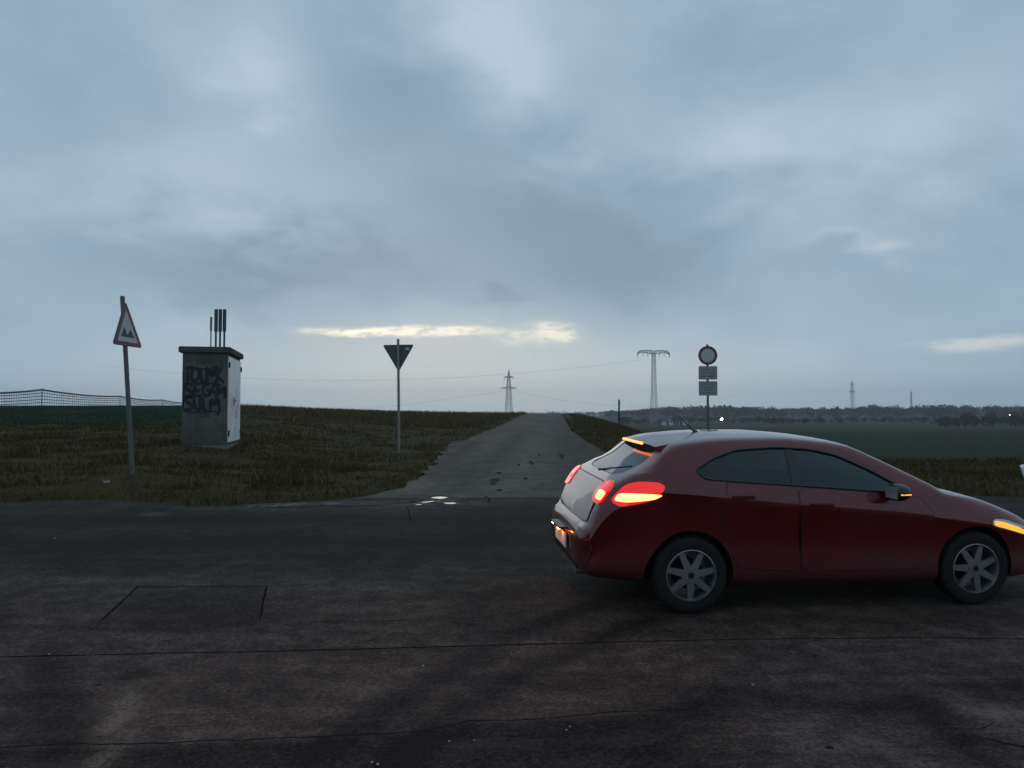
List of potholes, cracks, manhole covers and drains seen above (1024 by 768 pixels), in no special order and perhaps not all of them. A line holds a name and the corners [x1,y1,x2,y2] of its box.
crack [973,721,1024,748]
